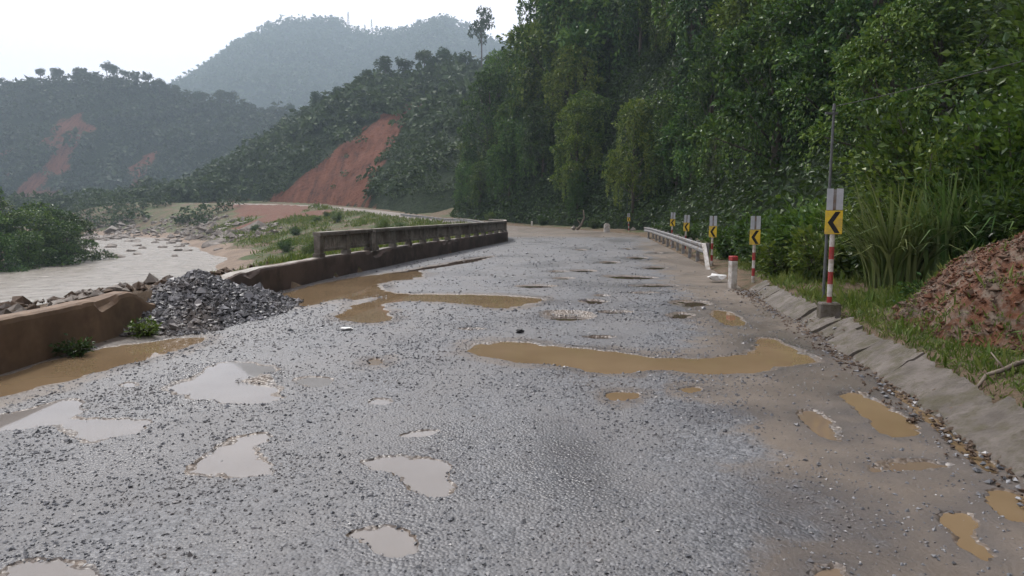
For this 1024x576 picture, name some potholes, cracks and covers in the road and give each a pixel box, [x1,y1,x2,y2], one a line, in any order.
pothole [934,510,998,561]
pothole [795,408,844,442]
pothole [461,337,825,375]
pothole [875,376,999,476]
pothole [345,524,419,558]
pothole [706,310,747,326]
pothole [538,310,597,321]
pothole [184,432,275,479]
pothole [399,429,441,437]
pothole [282,271,547,323]
pothole [603,391,642,401]
pothole [983,488,1024,523]
